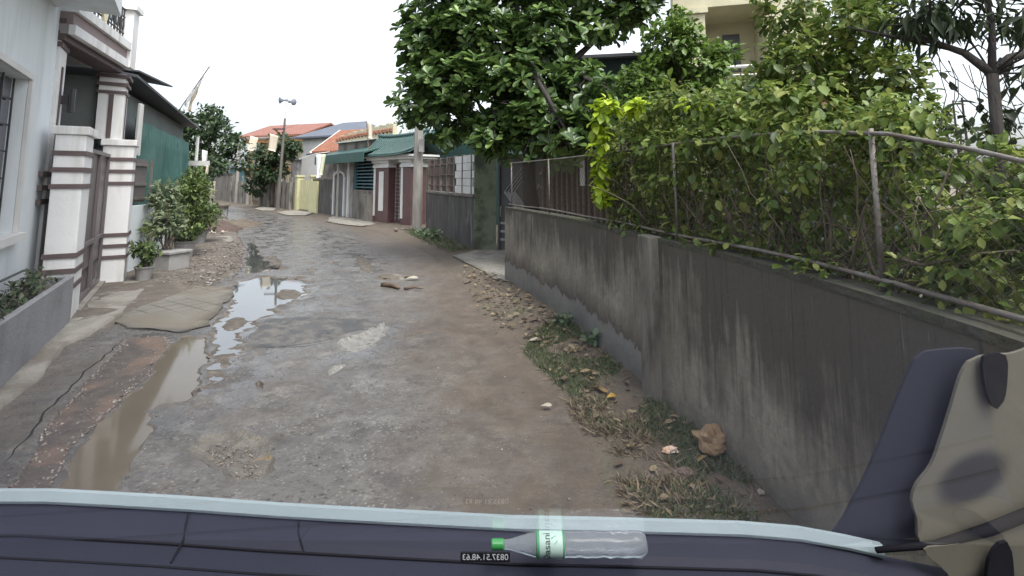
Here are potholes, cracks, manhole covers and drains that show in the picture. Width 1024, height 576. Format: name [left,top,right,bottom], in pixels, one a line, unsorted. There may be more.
crack [6,329,169,461]
pothole [192,275,315,397]
pothole [242,240,279,274]
pothole [56,335,213,492]
pothole [186,430,277,481]
